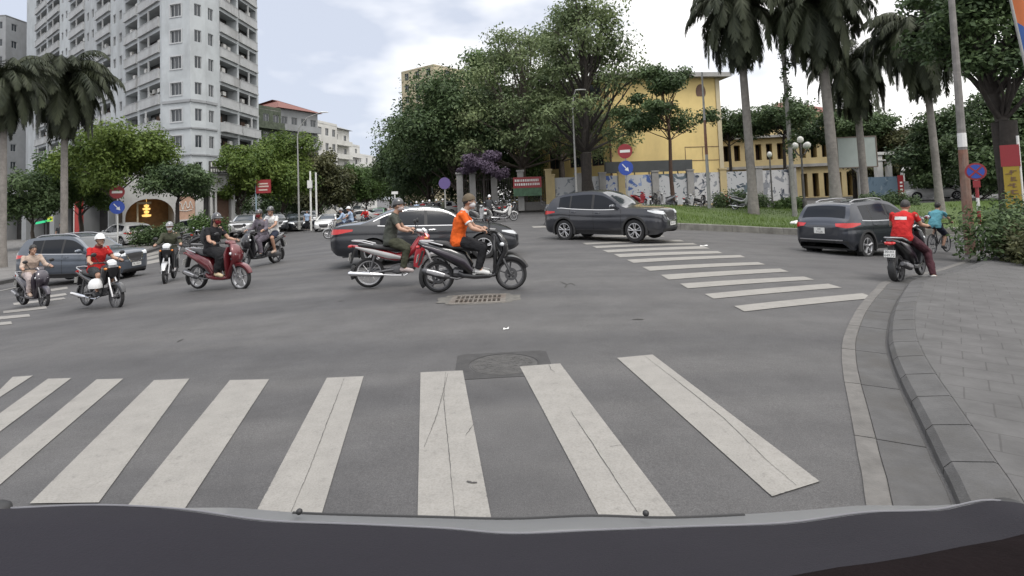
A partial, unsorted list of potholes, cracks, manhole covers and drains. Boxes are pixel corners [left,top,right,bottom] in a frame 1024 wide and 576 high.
manhole cover [455,350,551,380]
drain grate [436,293,521,305]
crack [572,413,637,511]
